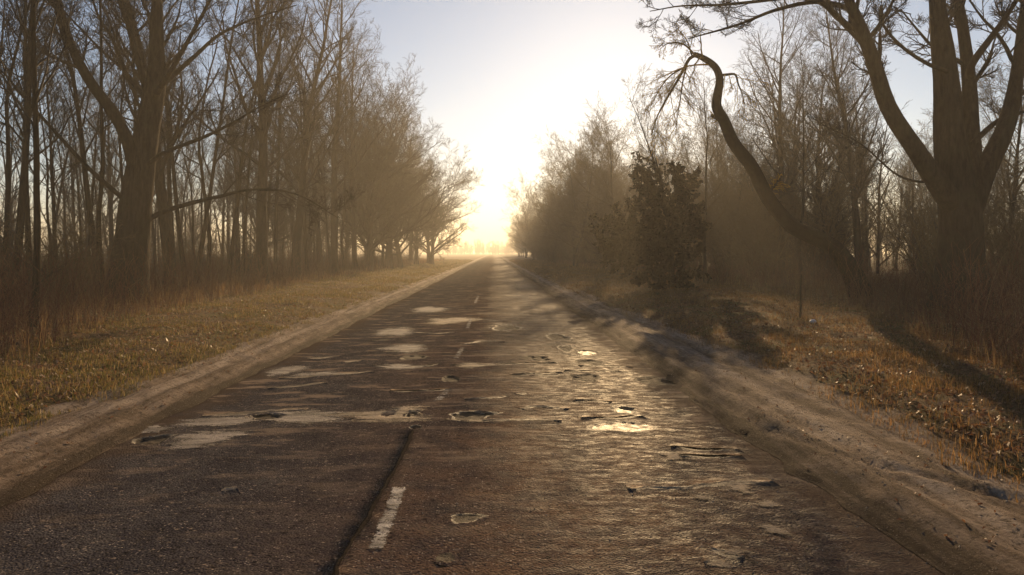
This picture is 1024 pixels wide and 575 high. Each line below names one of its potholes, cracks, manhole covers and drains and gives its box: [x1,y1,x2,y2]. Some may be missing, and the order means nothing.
pothole [602,403,645,415]
pothole [443,512,495,526]
pothole [436,409,512,423]
pothole [120,431,185,448]
pothole [539,332,580,342]
pothole [245,412,285,421]
crack [625,443,782,495]
pothole [437,374,466,384]
pothole [573,349,605,358]
